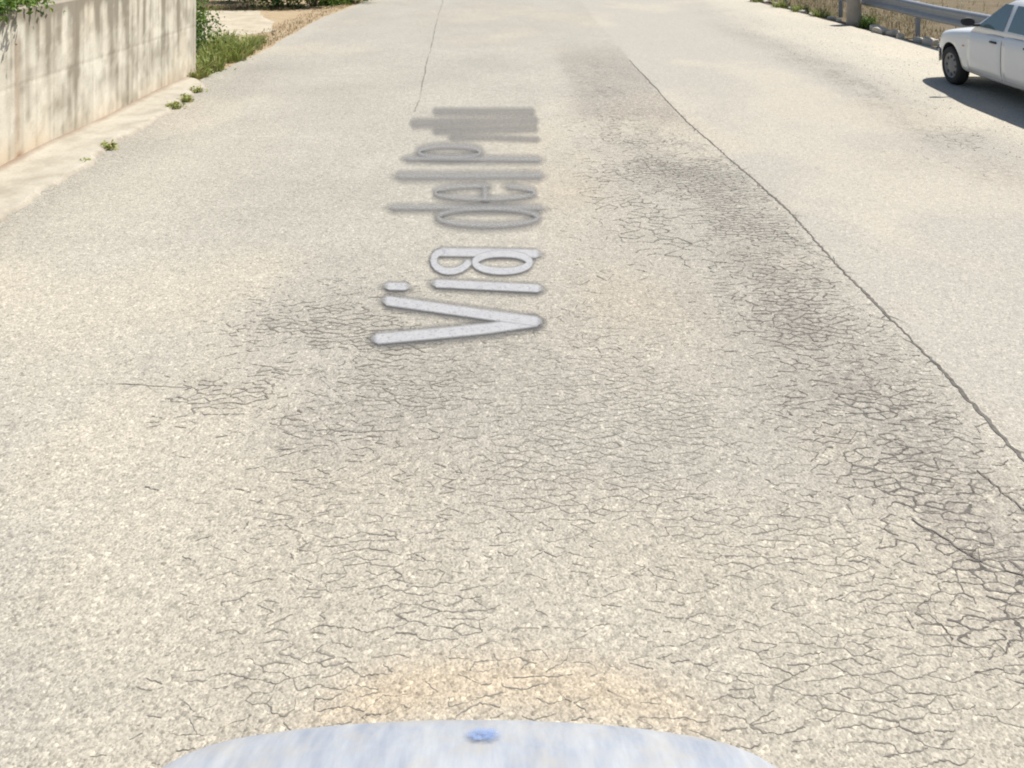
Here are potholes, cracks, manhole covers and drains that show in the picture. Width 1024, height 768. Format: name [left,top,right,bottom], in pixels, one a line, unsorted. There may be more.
crack [413,1,443,112]
crack [94,112,1024,768]
crack [5,256,497,572]
crack [533,55,770,362]
